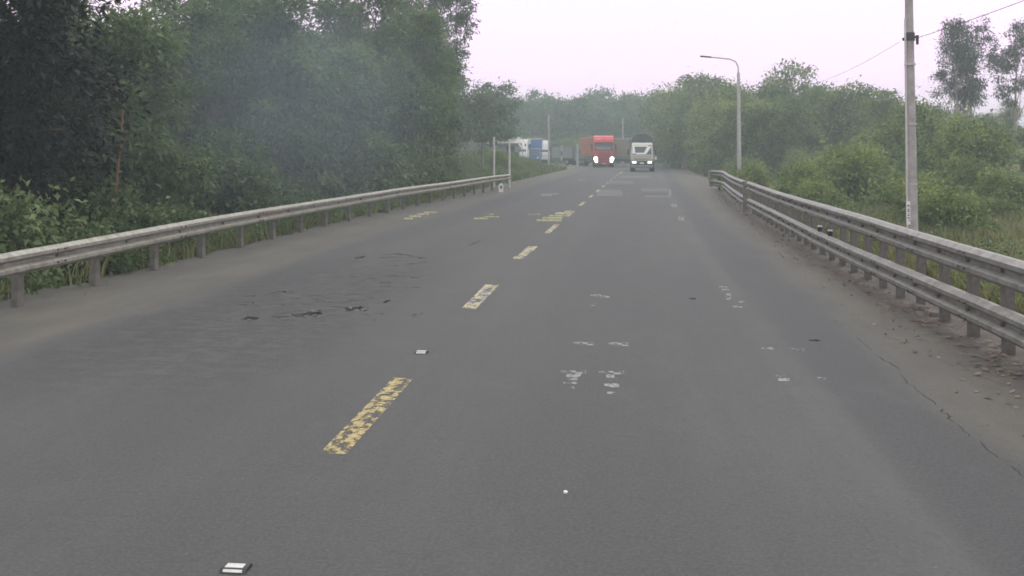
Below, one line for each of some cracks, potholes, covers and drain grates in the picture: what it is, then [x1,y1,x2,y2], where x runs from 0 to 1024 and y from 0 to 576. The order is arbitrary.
crack [835,321,1024,477]
crack [239,253,427,328]
pothole [292,309,323,318]
